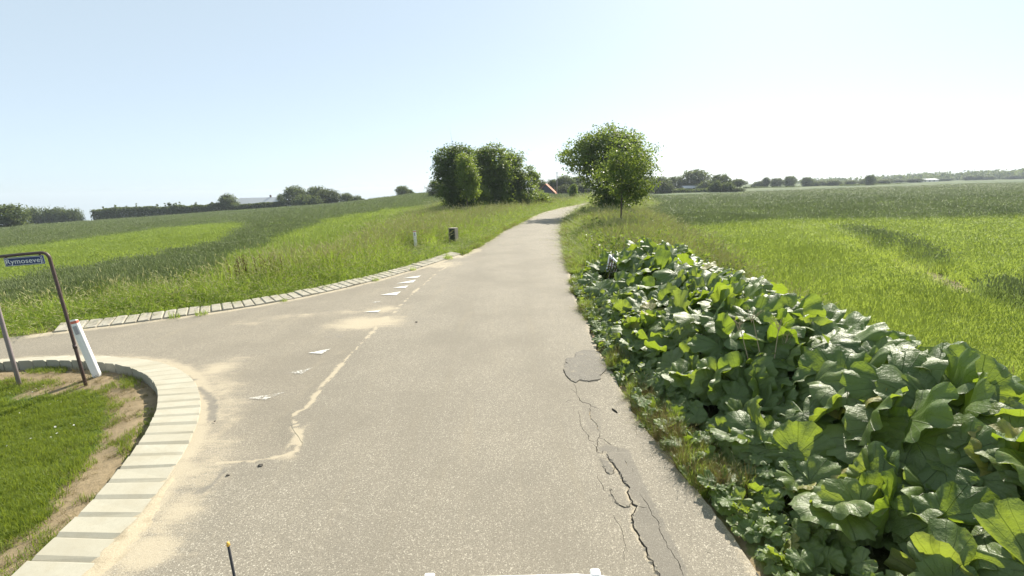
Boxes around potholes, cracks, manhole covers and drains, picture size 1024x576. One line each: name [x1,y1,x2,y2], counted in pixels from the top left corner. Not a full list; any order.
crack [564,371,683,576]
